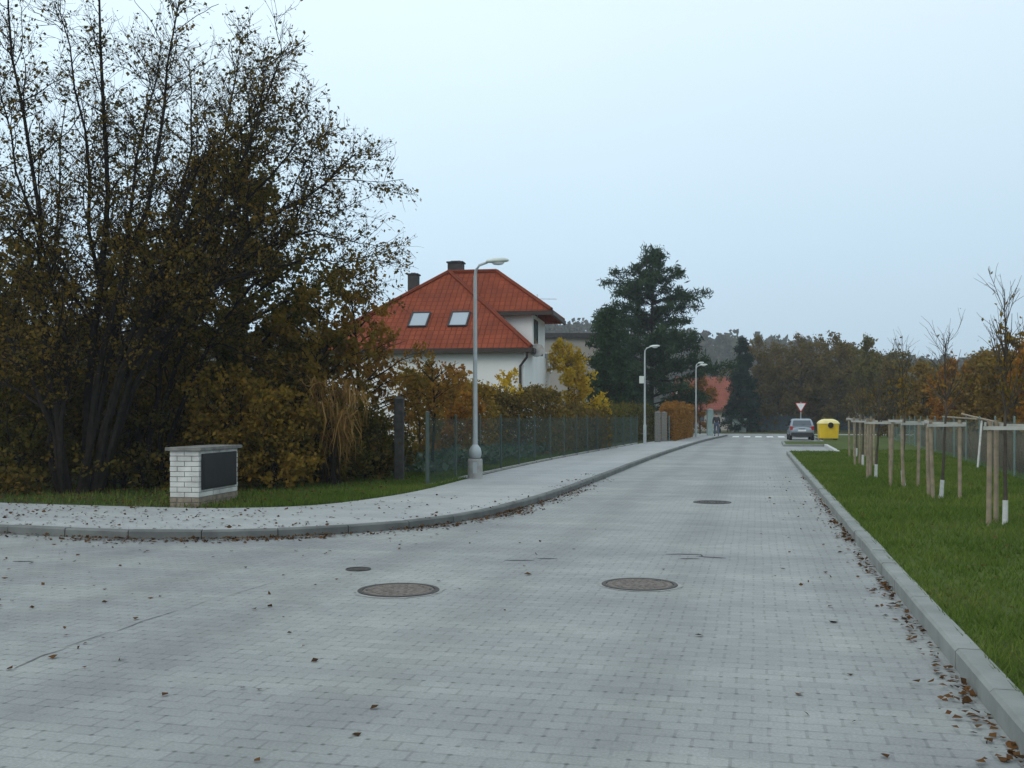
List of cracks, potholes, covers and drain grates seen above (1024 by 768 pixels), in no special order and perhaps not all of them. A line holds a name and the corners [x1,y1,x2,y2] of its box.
manhole cover [354,583,445,598]
manhole cover [598,577,683,592]
